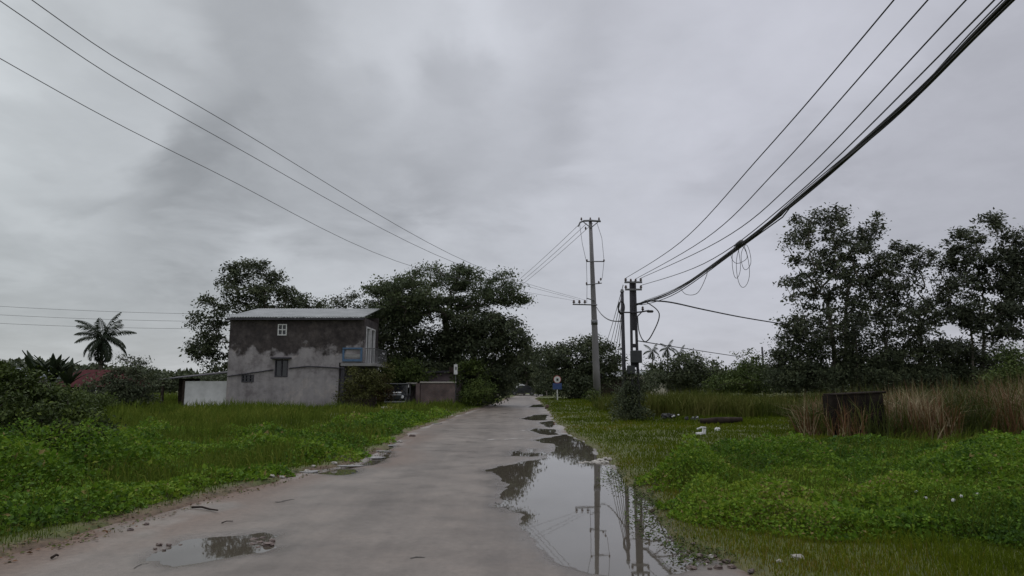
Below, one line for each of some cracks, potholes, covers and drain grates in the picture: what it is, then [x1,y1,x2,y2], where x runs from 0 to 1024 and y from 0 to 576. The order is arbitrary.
pothole [98,523,320,576]
pothole [303,466,376,477]
pothole [351,450,401,467]
